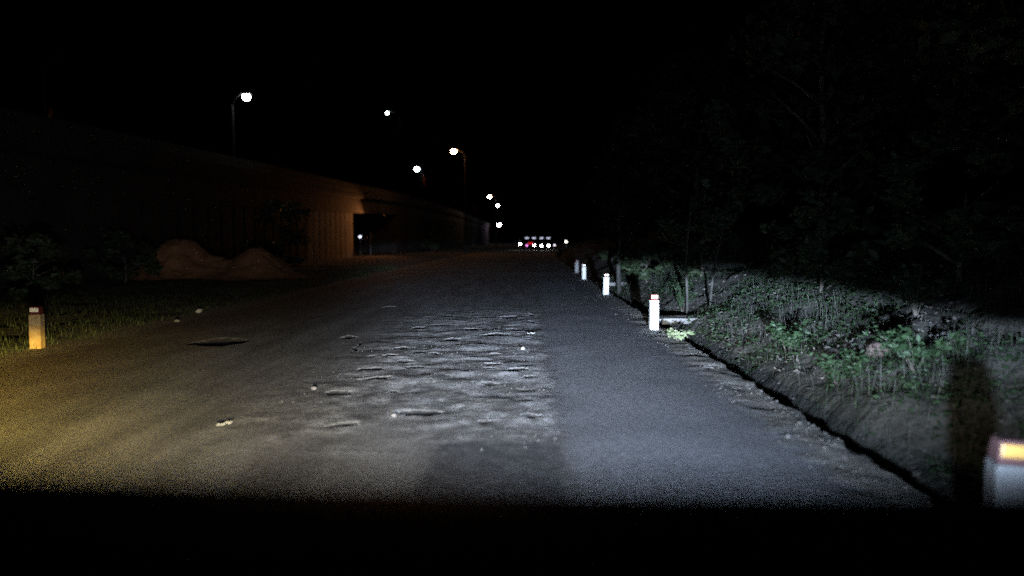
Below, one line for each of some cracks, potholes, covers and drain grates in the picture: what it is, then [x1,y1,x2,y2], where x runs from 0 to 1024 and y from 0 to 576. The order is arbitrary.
pothole [186,337,251,347]
